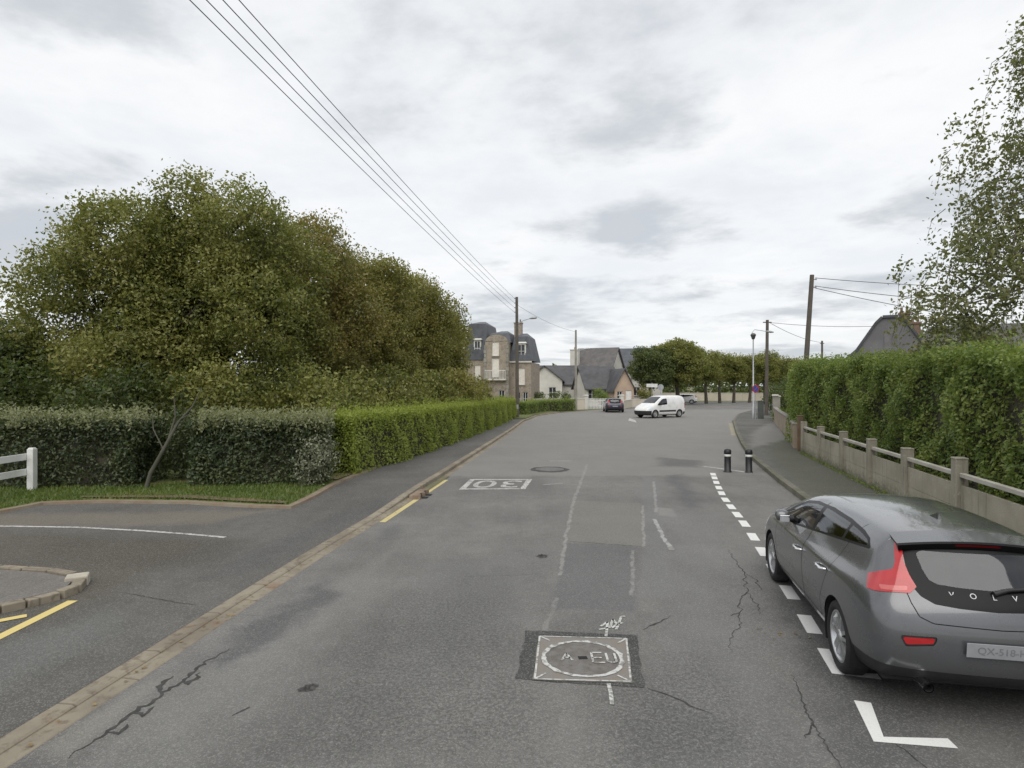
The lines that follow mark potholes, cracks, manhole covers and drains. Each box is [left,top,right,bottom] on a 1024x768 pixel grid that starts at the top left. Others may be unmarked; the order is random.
crack [69,649,229,758]
crack [647,687,712,714]
crack [728,554,762,648]
crack [791,674,842,768]
manhole cover [515,630,645,688]
pothole [297,683,319,692]
